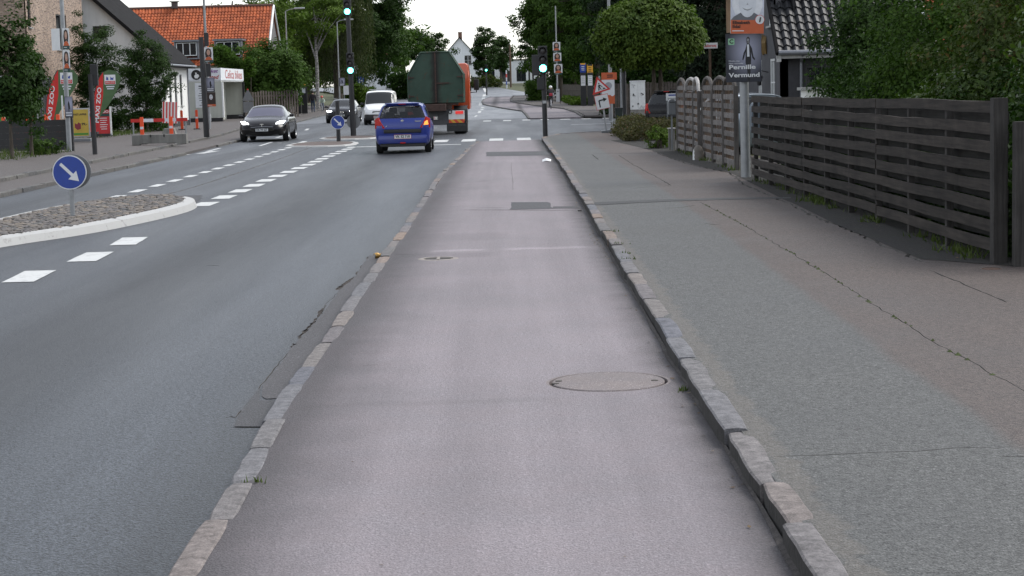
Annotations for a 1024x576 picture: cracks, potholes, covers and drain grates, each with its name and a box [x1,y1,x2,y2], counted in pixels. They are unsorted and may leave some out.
crack [663,204,1024,391]
crack [585,148,1006,302]
manhole cover [546,372,671,392]
